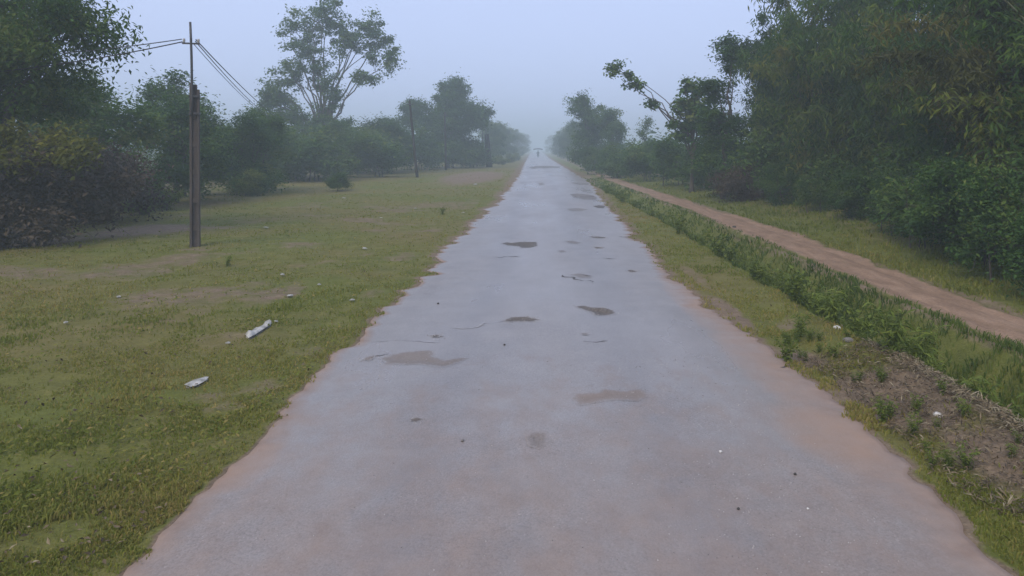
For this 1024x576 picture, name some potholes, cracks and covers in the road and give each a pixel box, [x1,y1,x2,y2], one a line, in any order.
pothole [574,305,617,316]
